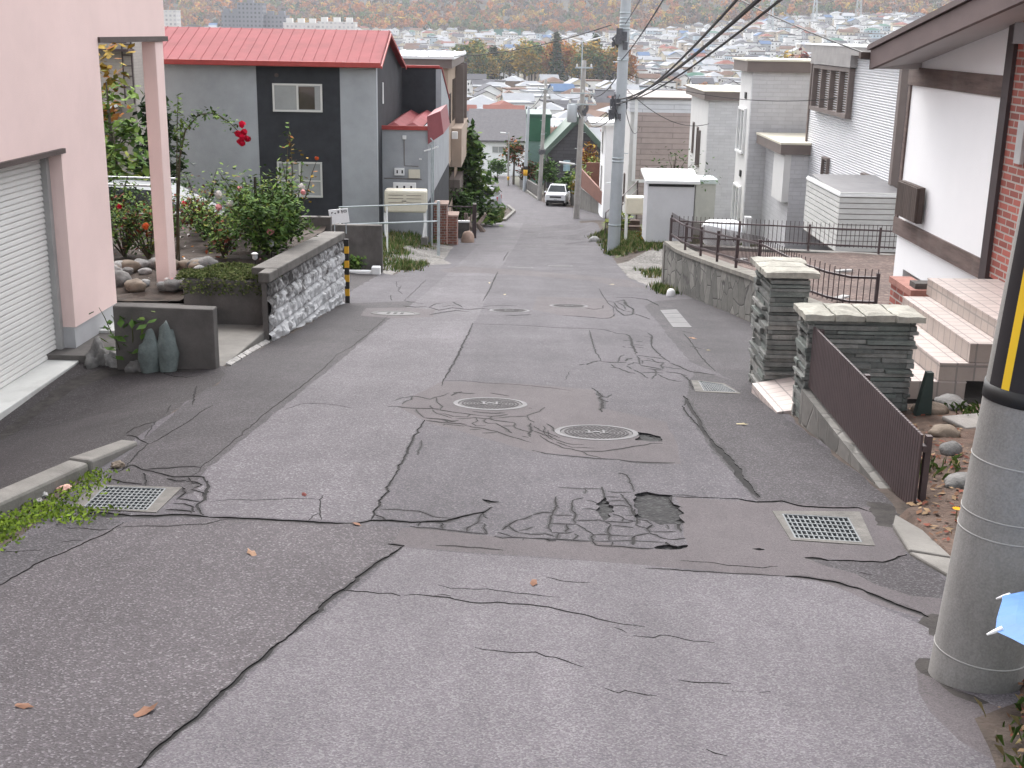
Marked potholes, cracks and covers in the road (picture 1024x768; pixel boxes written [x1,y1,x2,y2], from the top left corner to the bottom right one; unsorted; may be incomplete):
crack [646,554,929,617]
drain grate [772,511,875,546]
crack [376,392,689,550]
manhole cover [554,425,639,441]
crack [565,291,760,498]
drain grate [691,380,741,394]
crack [475,647,582,667]
manhole cover [453,397,527,410]
crack [605,688,657,696]
crack [64,373,323,542]
pothole [633,492,685,525]
crack [680,680,771,693]
